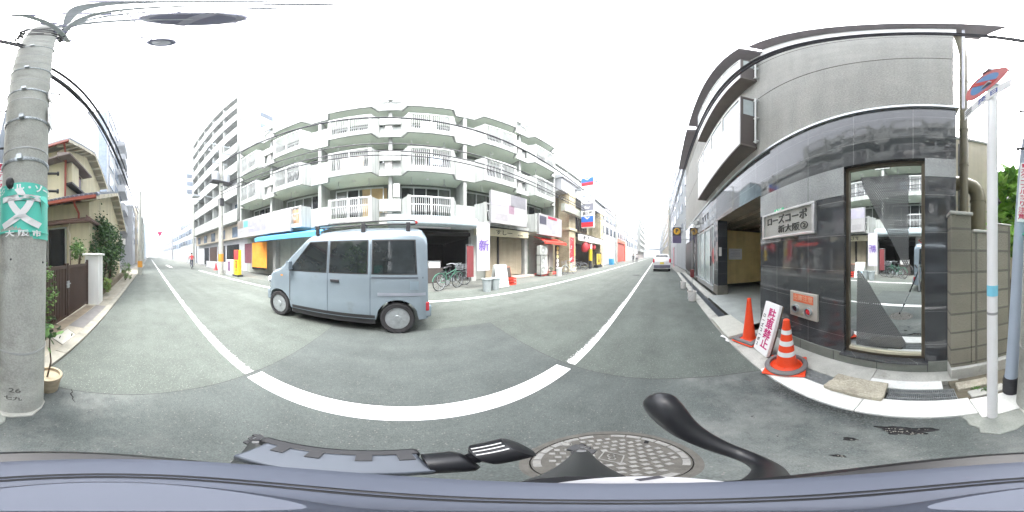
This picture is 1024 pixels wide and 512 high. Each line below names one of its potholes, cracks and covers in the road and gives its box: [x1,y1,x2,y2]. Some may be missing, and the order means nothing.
drain grate [885,389,958,401]
drain grate [680,273,725,317]
pothole [873,426,939,435]
manhole cover [519,431,705,478]
